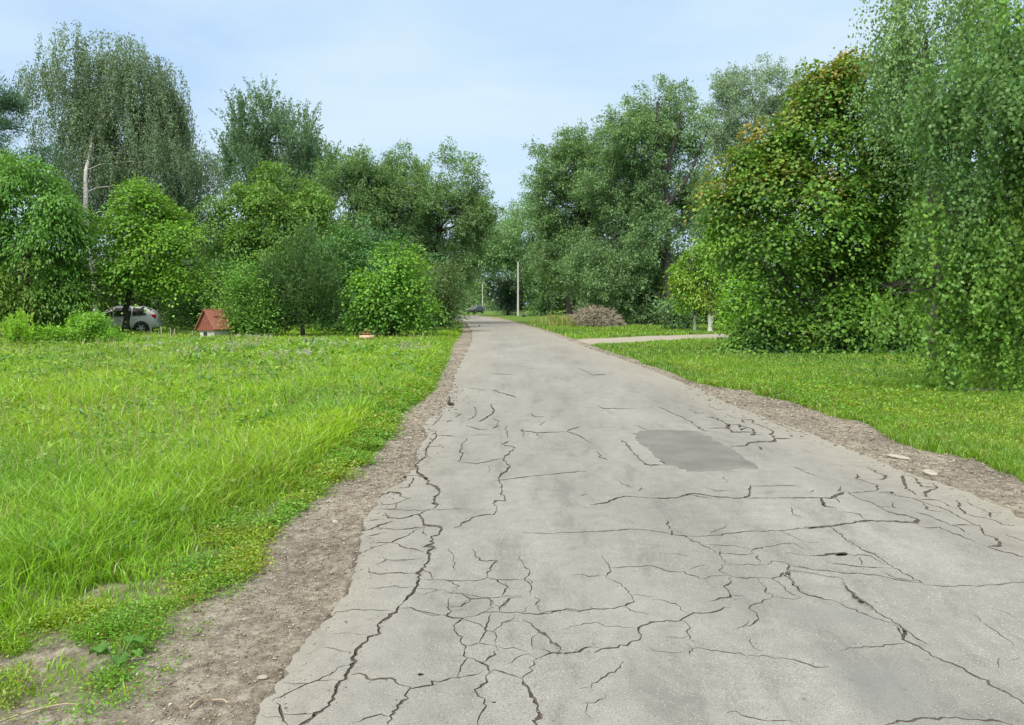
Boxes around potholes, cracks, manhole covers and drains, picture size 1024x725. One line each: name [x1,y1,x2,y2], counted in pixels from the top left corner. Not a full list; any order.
crack [262,374,1024,725]
